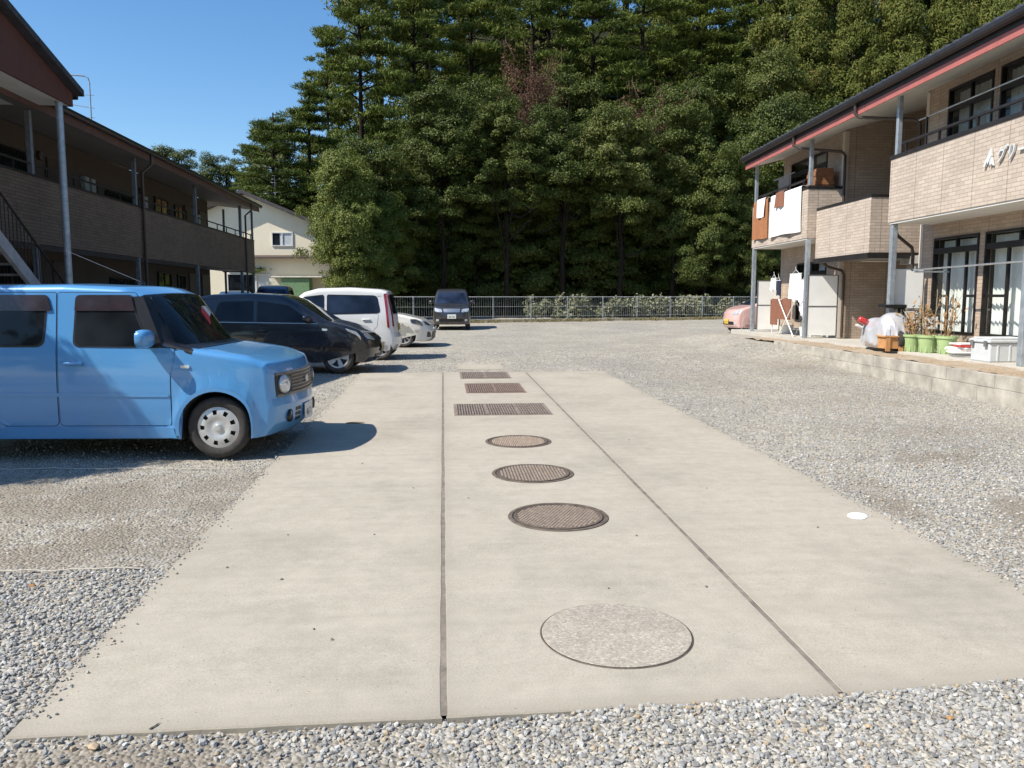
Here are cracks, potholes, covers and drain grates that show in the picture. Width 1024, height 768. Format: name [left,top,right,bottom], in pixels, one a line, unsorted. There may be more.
manhole cover [508,503,609,531]
manhole cover [492,464,574,483]
manhole cover [540,604,694,669]
manhole cover [485,435,552,448]
